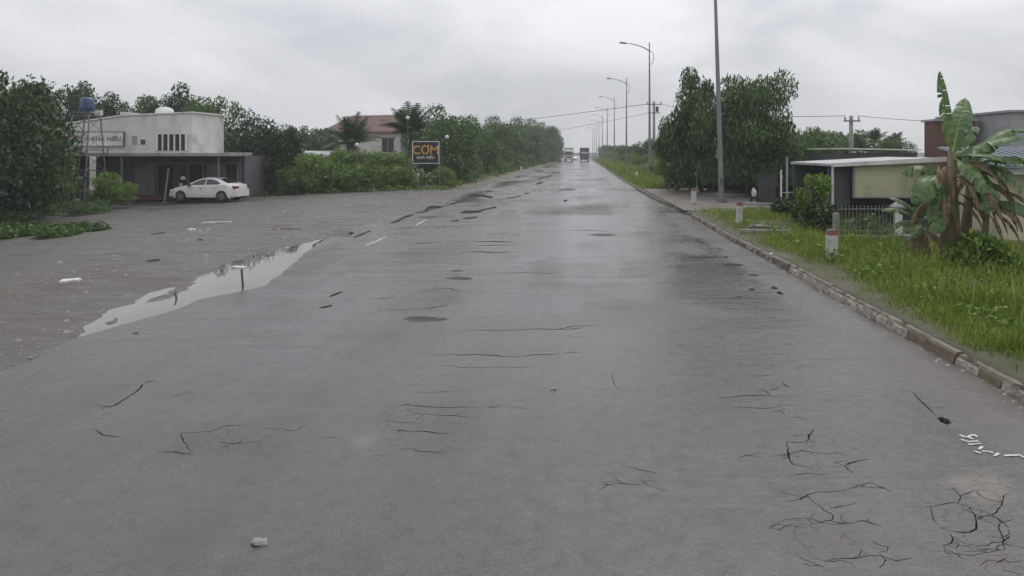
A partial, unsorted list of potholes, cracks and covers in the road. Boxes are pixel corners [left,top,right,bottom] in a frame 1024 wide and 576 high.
crack [599,466,667,492]
crack [929,489,1022,575]
crack [432,324,601,368]
crack [88,380,165,408]
crack [391,391,524,454]
crack [165,424,306,454]
crack [723,374,911,568]
